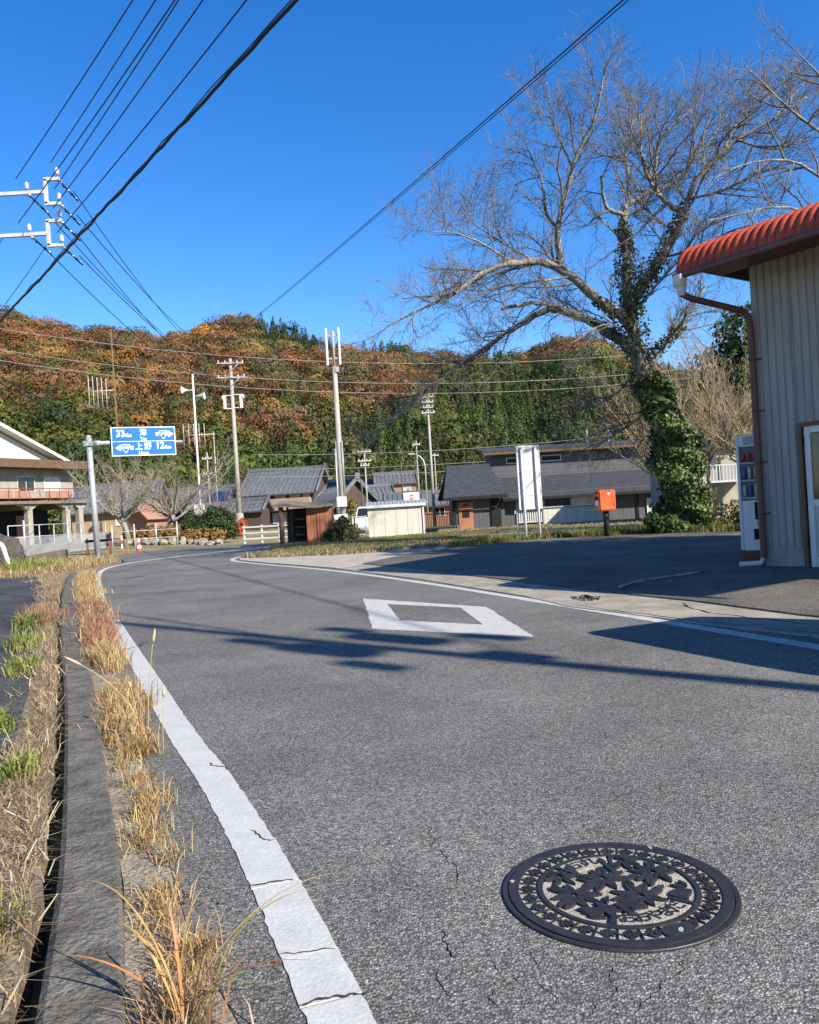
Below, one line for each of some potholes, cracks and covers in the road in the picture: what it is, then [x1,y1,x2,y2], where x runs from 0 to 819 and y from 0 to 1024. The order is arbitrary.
crack [432,927,459,998]
crack [298,992,370,1006]
crack [682,602,819,625]
crack [487,951,558,1012]
crack [424,824,458,887]
manhole cover [503,842,742,954]
crack [592,959,685,1016]
